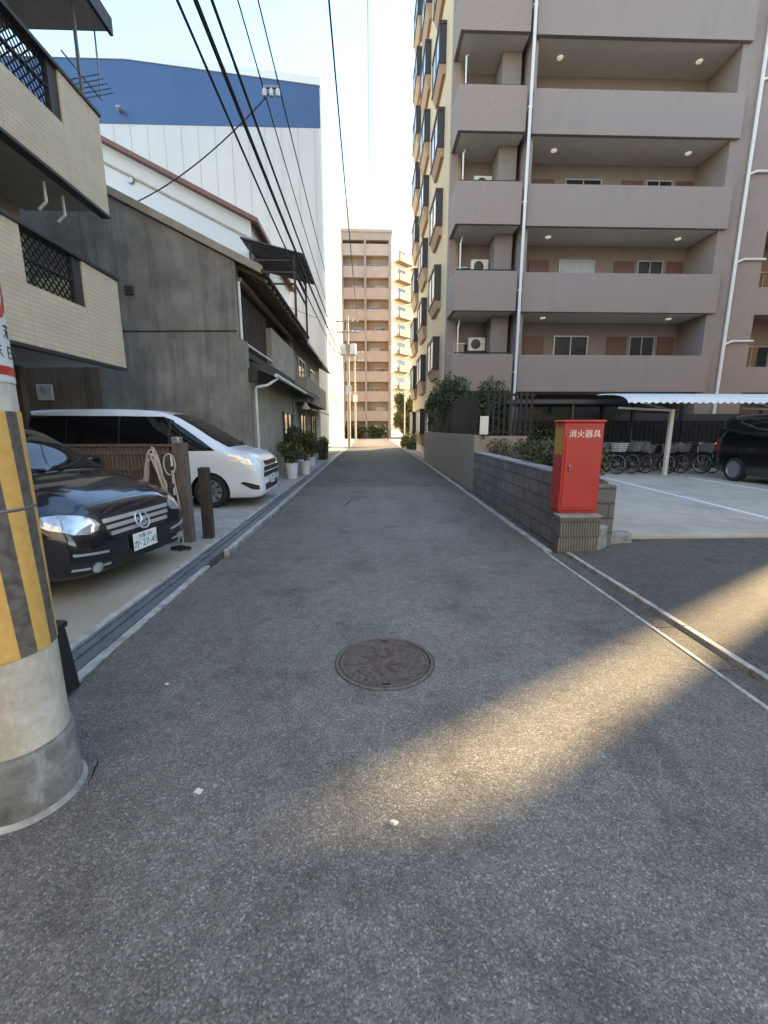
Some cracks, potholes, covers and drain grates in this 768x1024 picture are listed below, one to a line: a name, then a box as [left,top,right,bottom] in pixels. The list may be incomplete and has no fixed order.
manhole cover [335,637,434,691]
